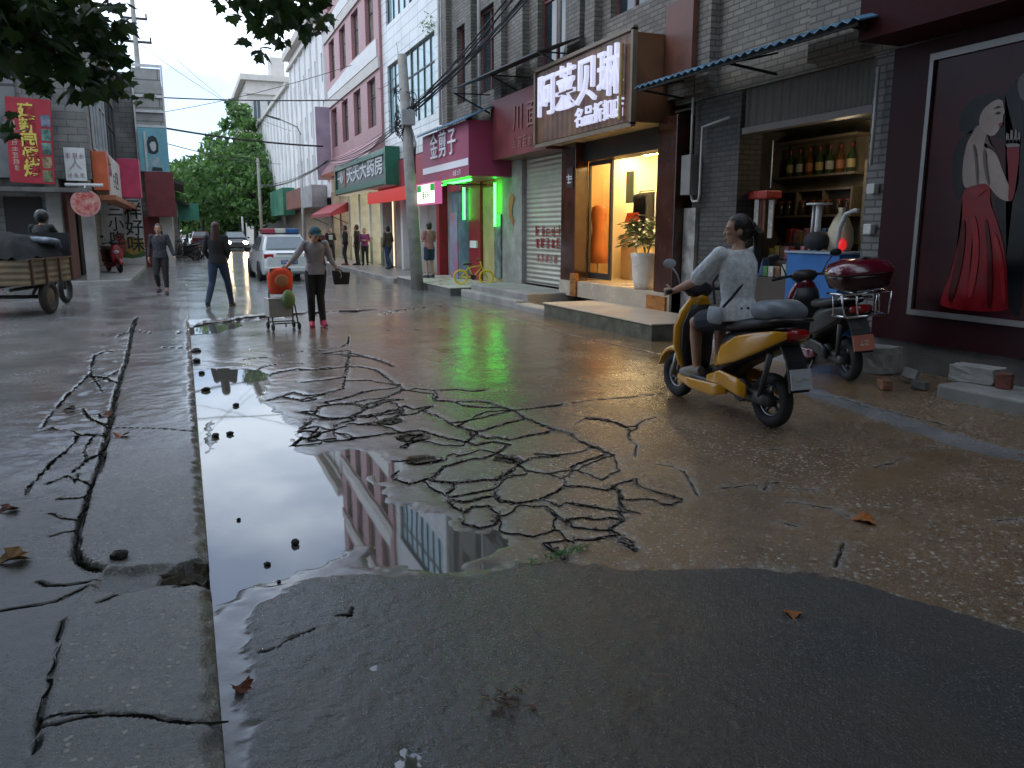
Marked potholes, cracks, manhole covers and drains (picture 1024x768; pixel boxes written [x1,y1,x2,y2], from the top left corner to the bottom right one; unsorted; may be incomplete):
crack [0,317,229,756]
crack [244,305,947,562]
